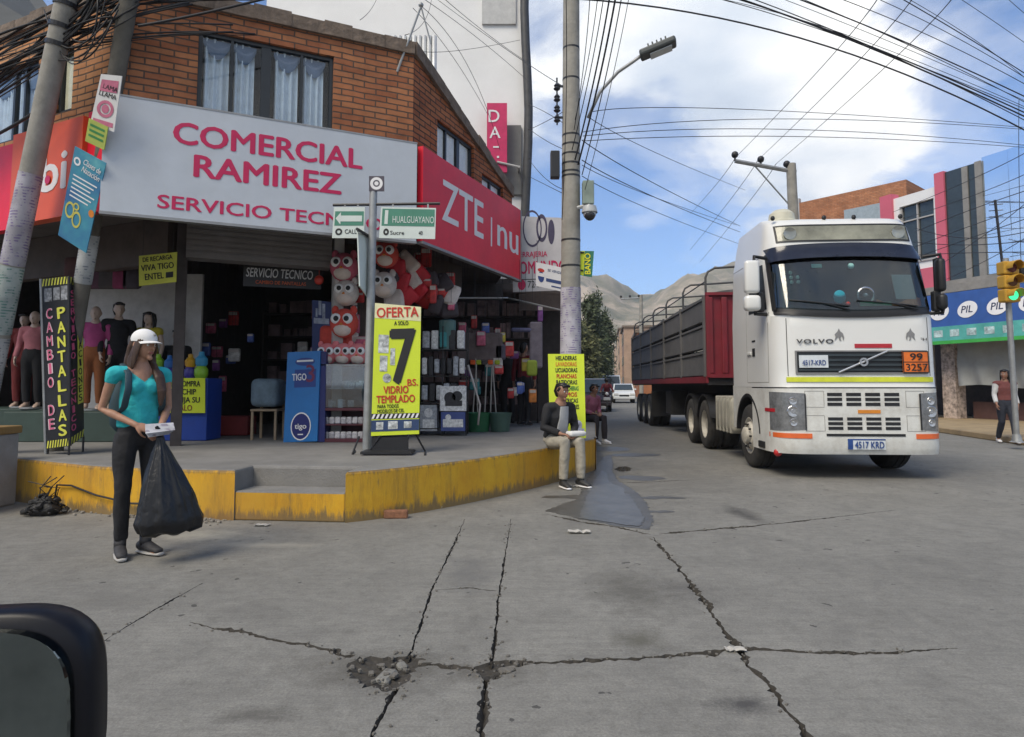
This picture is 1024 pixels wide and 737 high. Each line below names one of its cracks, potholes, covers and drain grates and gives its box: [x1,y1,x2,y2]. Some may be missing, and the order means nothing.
crack [548,510,891,534]
pothole [330,648,453,702]
crack [427,663,475,671]
pothole [466,654,529,690]
crack [515,646,956,666]
crack [103,583,355,659]
